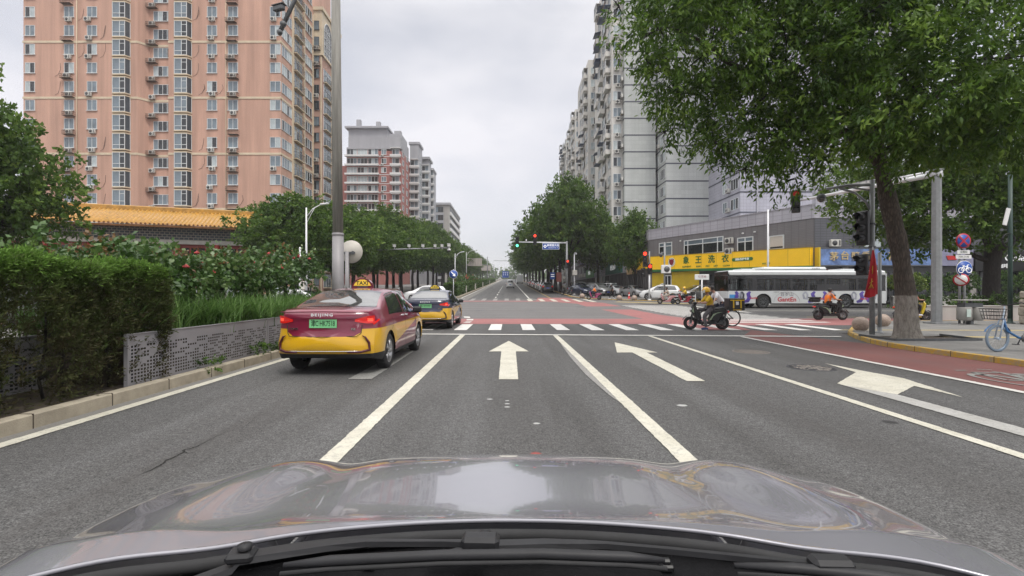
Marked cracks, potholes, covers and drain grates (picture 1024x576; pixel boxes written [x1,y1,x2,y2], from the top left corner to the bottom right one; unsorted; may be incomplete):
crack [142,418,254,474]
manhole cover [786,364,837,372]
